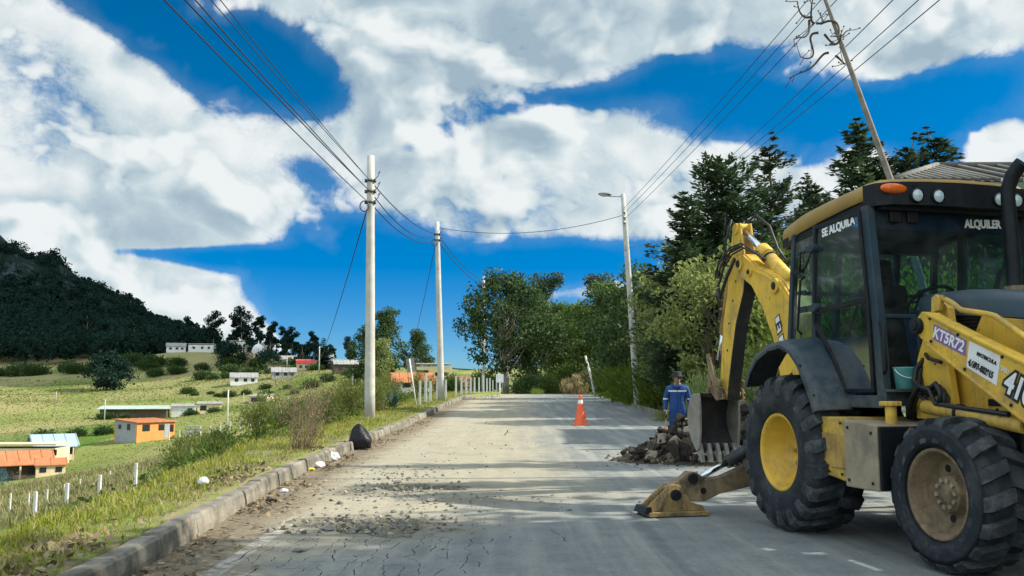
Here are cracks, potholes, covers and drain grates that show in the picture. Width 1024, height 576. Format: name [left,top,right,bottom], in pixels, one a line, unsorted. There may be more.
crack [221,536,493,576]
